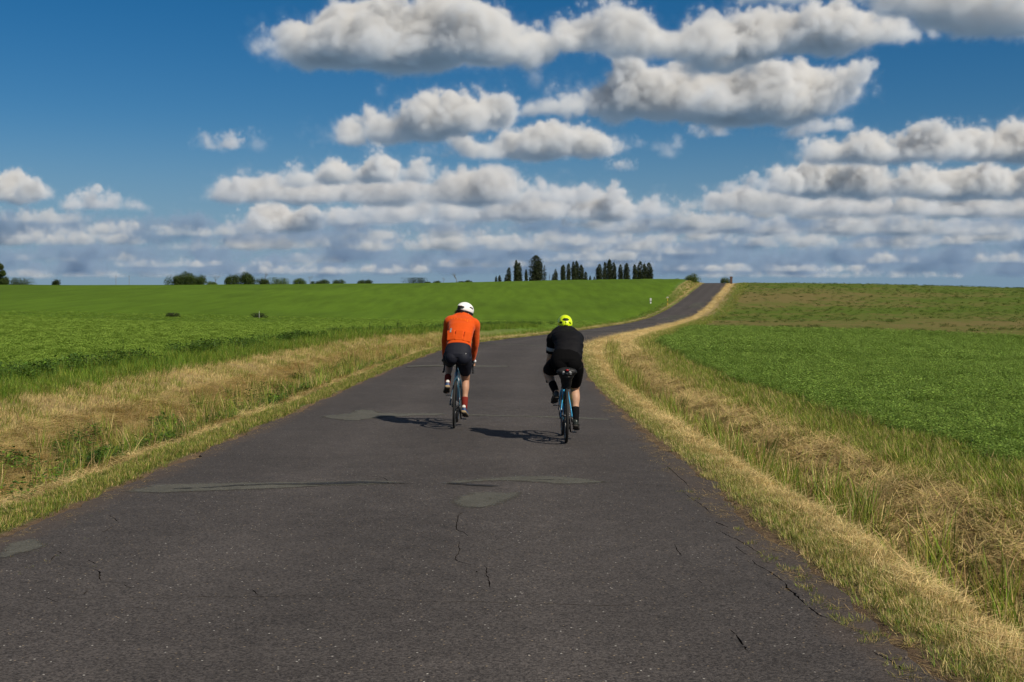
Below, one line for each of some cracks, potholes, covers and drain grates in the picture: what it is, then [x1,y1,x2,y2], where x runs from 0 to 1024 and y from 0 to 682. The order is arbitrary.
crack [663,465,909,672]
crack [46,511,613,610]
